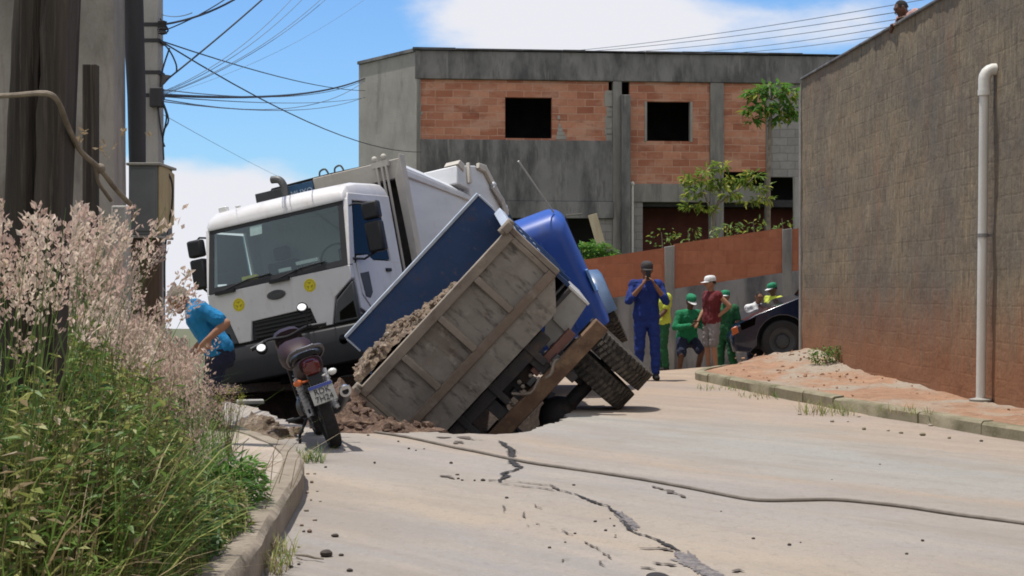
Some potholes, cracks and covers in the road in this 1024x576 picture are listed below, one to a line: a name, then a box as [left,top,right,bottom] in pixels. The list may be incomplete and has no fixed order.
crack [489,440,680,569]
pothole [189,376,573,434]
